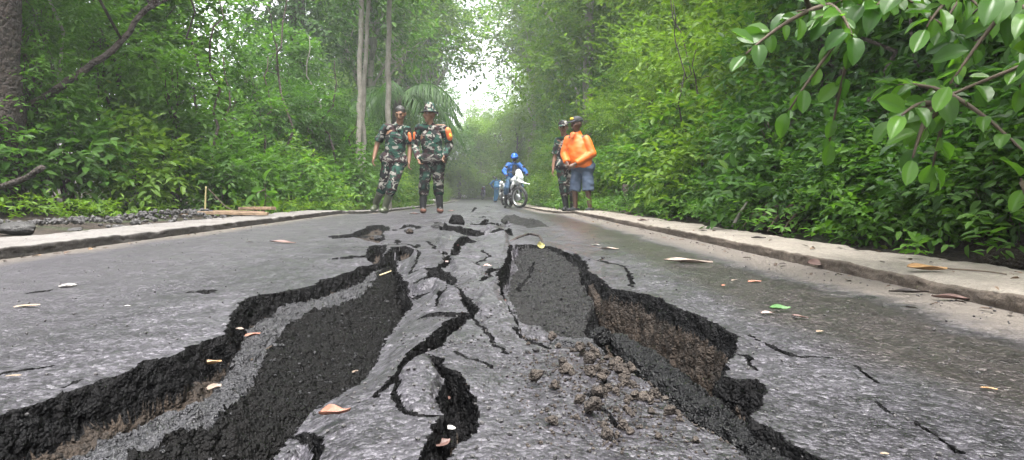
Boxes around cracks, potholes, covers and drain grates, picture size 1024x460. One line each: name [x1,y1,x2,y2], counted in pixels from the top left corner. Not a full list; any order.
crack [372,206,552,440]
crack [874,401,966,454]
crack [736,335,835,371]
pothole [328,225,386,243]
crack [289,432,326,460]
crack [854,365,882,384]
crack [588,257,635,287]
pothole [495,244,825,460]
crack [0,365,83,388]
